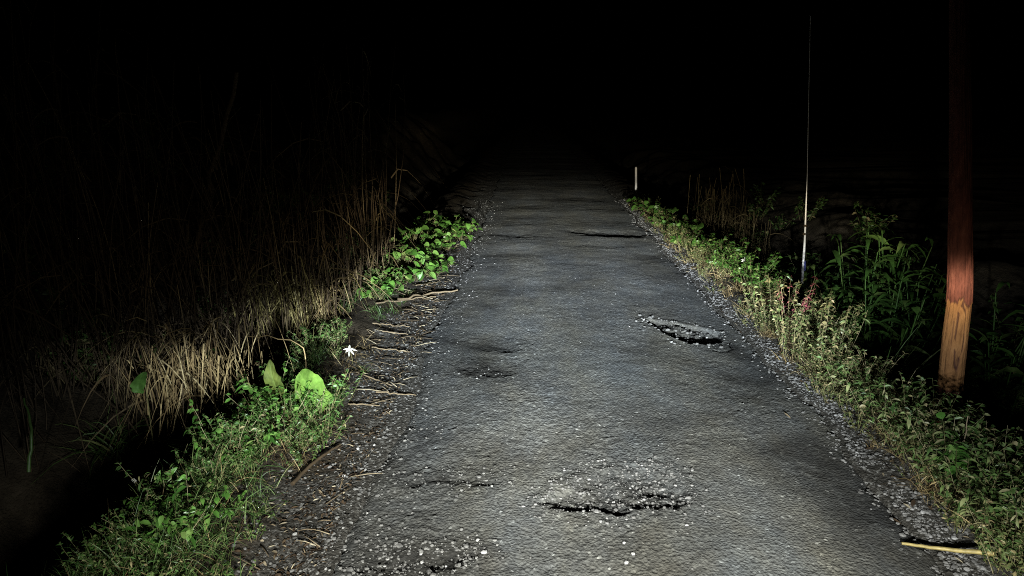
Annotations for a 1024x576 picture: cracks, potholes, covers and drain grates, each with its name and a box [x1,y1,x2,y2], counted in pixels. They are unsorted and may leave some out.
pothole [519,455,714,529]
pothole [634,314,737,348]
pothole [551,227,656,239]
pothole [444,359,535,386]
